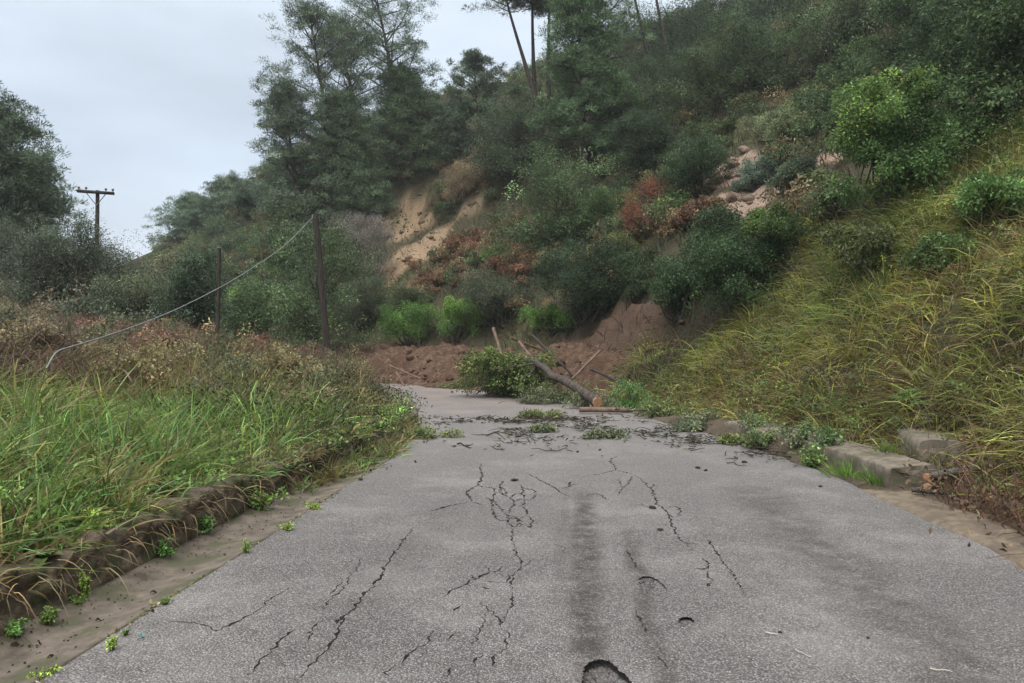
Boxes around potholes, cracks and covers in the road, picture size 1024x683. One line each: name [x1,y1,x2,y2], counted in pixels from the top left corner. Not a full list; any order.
crack [383,456,746,677]
pothole [678,617,694,627]
crack [169,527,414,679]
pothole [582,659,632,683]
pothole [638,576,667,596]
